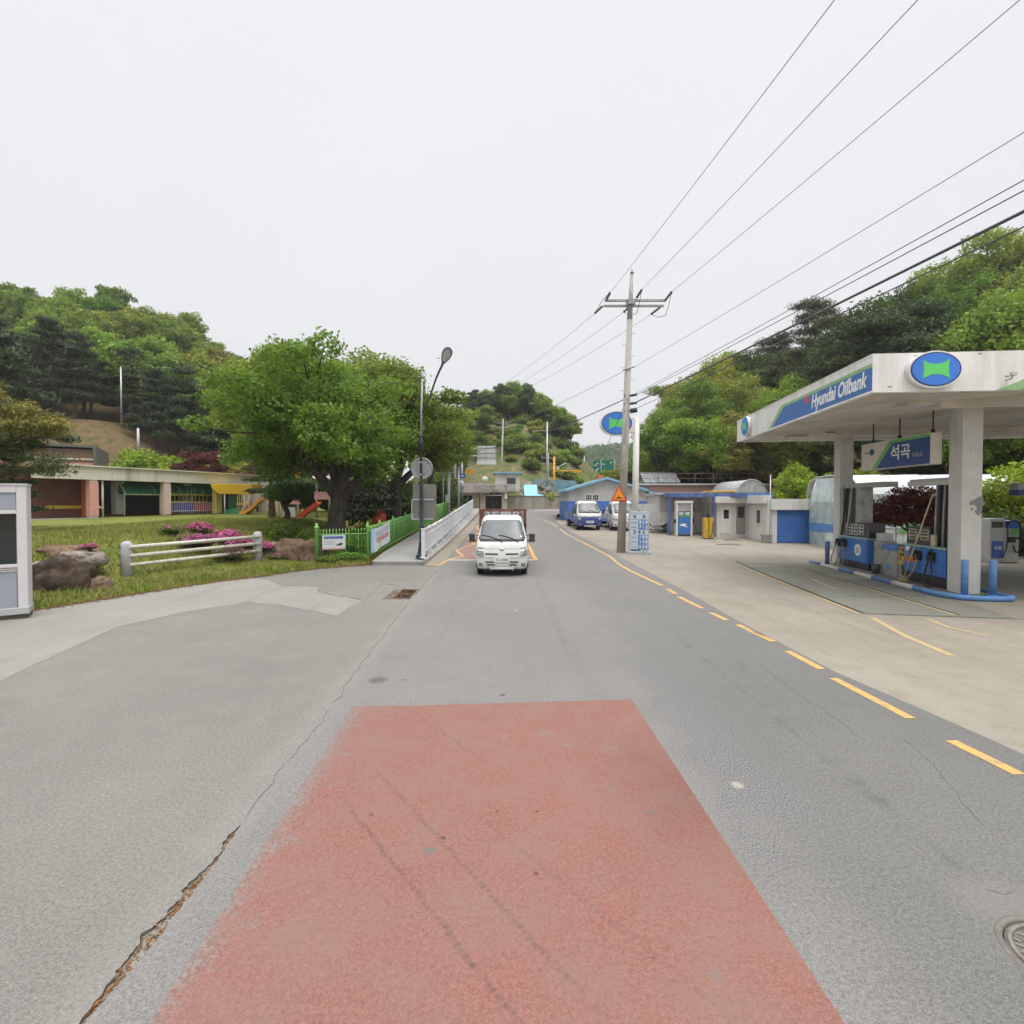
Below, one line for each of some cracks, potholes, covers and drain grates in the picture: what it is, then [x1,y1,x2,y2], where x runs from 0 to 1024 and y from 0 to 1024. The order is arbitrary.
drain grate [382,589,419,599]
manhole cover [994,915,1024,968]
